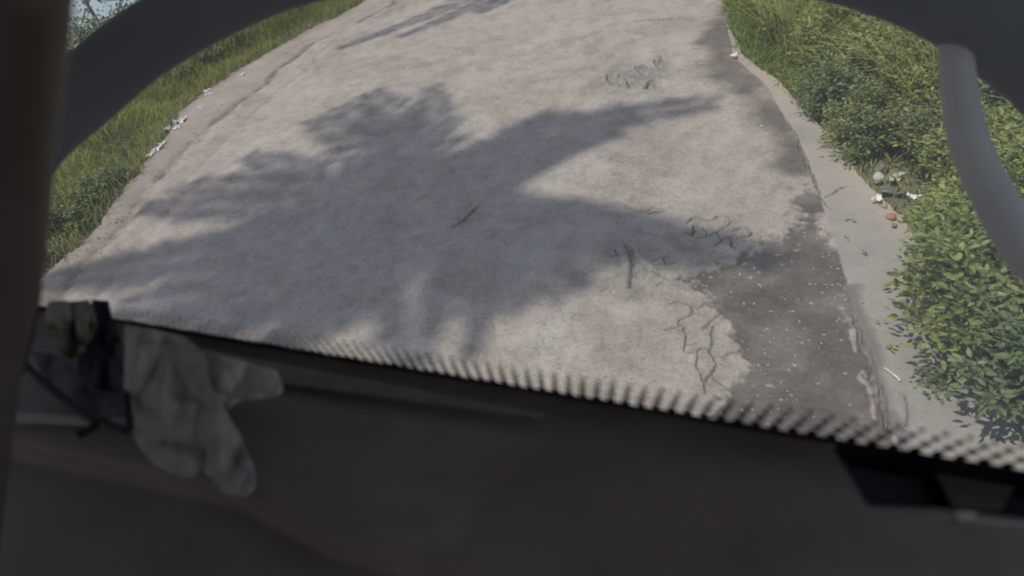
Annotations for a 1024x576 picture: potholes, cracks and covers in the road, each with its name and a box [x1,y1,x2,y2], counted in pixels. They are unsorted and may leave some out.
crack [664,302,741,394]
crack [686,216,771,248]
